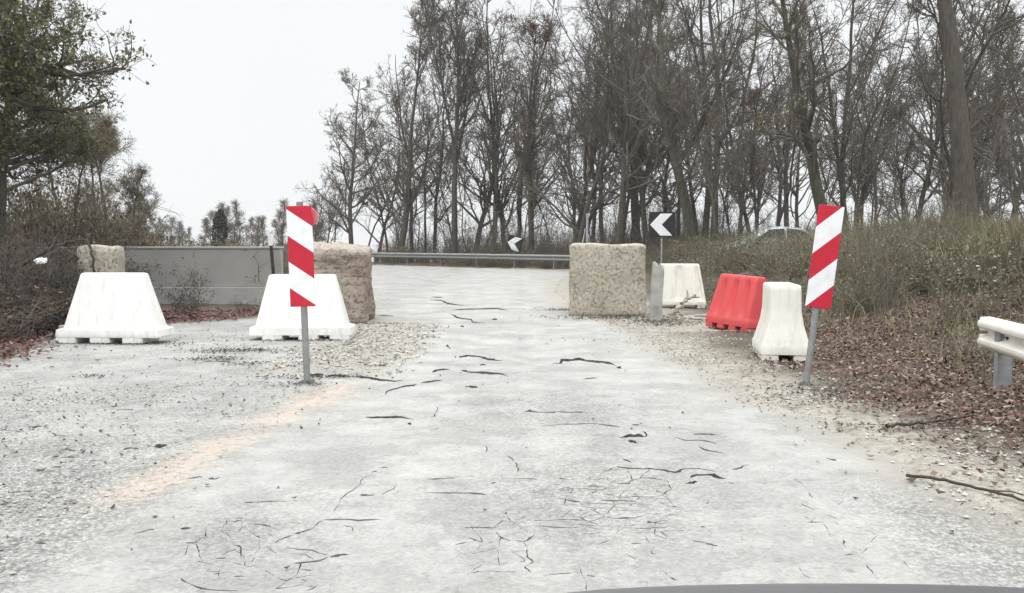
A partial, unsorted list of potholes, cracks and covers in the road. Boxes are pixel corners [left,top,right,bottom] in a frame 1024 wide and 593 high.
crack [456,433,749,590]
crack [525,409,647,438]
crack [310,344,508,395]
crack [436,297,505,327]
crack [180,467,395,591]
crack [555,358,622,379]
crack [367,416,411,425]
